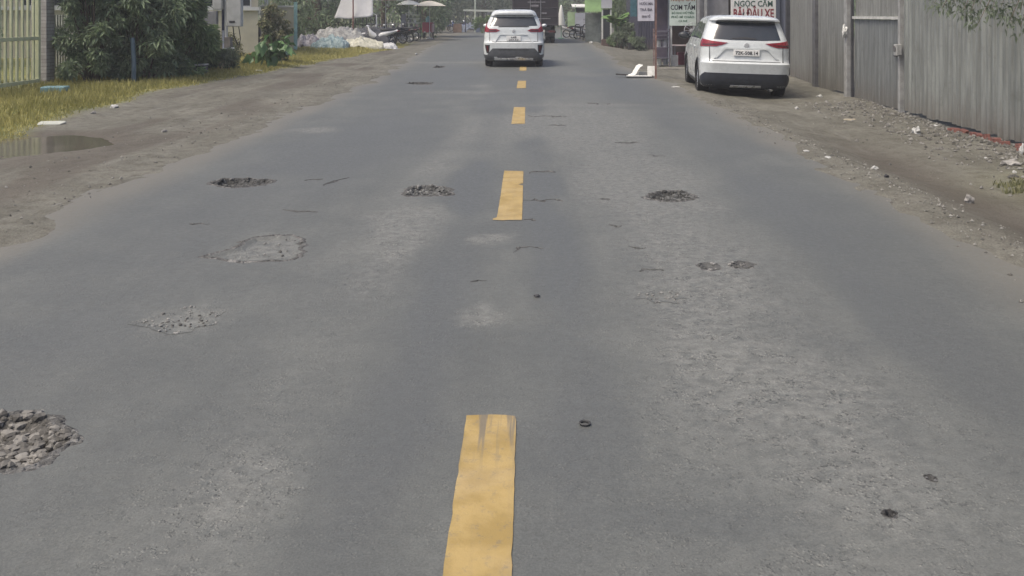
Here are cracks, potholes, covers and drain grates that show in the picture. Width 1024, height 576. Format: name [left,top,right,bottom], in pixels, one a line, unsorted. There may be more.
crack [523,198,563,221]
pothole [727,260,757,269]
crack [304,177,349,185]
pothole [641,190,699,202]
pothole [695,262,722,271]
pothole [400,184,455,197]
pothole [880,508,898,519]
pothole [206,177,277,188]
pothole [128,305,225,335]
pothole [0,408,85,475]
